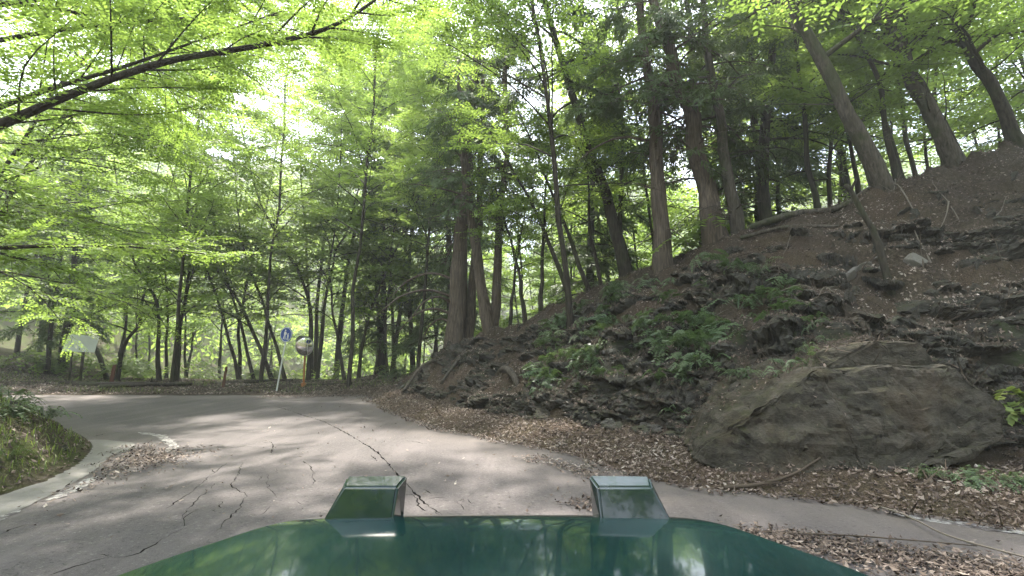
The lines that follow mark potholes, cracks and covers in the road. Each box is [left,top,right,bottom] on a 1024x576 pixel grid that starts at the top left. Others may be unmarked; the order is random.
crack [48,442,278,576]
crack [283,408,471,514]
